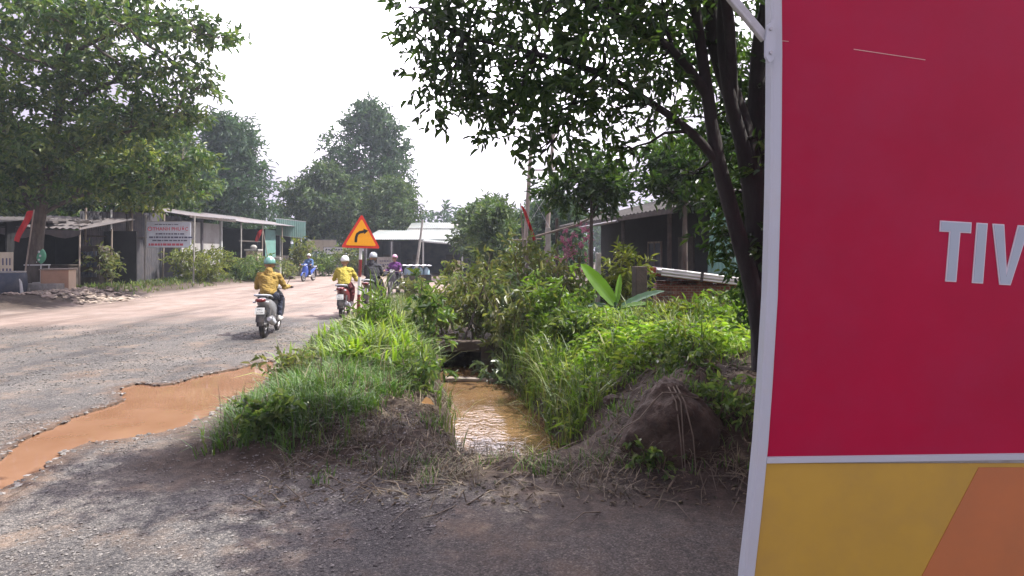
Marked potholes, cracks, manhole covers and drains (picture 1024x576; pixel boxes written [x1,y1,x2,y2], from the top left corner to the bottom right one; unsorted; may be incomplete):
pothole [0,360,279,502]
